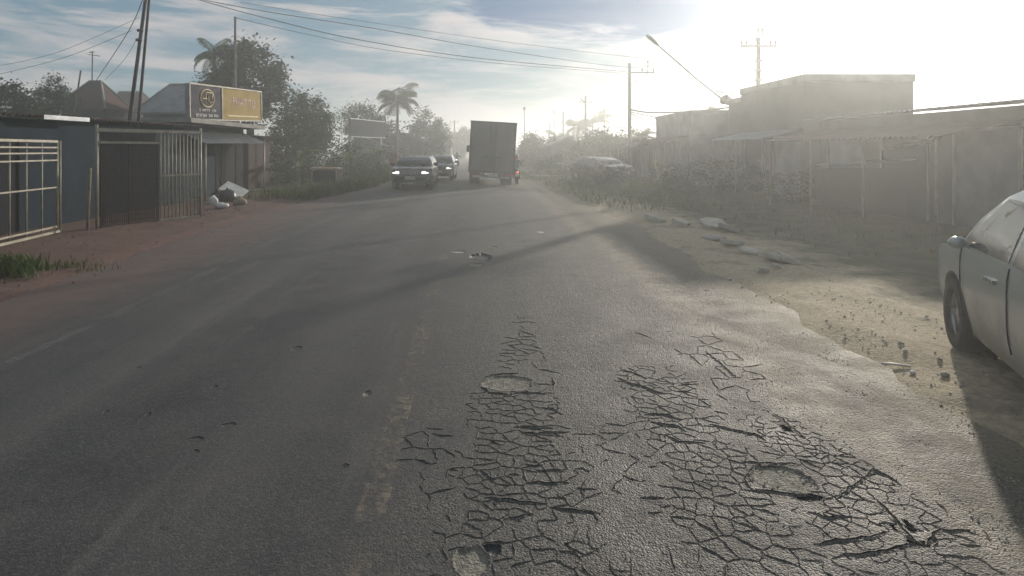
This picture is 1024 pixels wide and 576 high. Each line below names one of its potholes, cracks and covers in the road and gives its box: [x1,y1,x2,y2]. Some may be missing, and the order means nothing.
pothole [450,543,492,576]
pothole [481,543,504,557]
pothole [746,462,821,494]
pothole [467,253,493,261]
crack [397,317,1006,576]
pothole [479,375,536,392]
